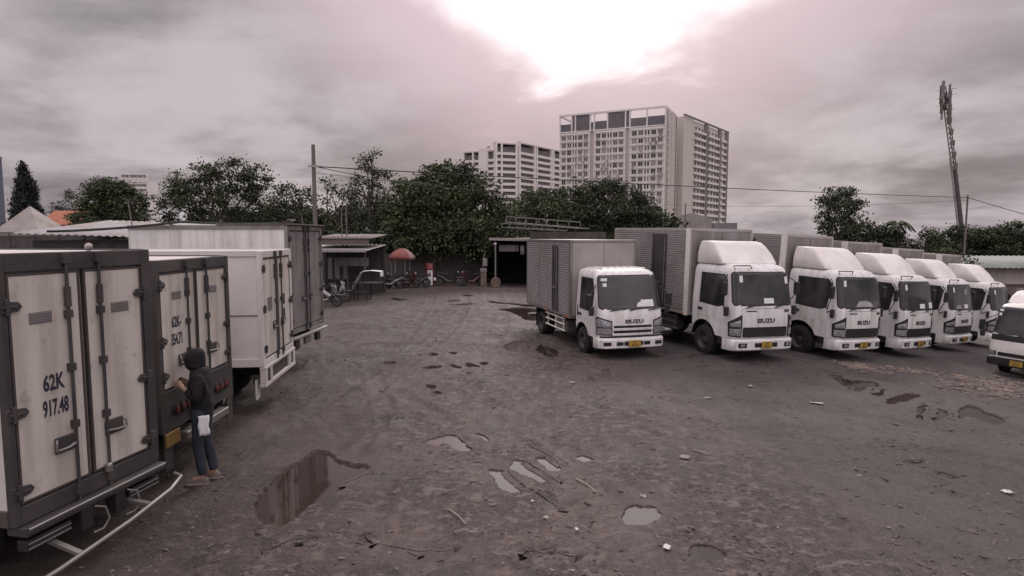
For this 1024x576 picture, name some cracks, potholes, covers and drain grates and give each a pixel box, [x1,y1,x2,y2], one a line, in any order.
pothole [482,467,533,496]
pothole [953,404,1012,426]
pothole [862,387,891,397]
pothole [613,502,670,529]
pothole [822,373,885,393]
pothole [680,540,735,565]
pothole [494,307,536,321]
pothole [245,448,375,535]
pothole [421,433,477,453]
pothole [504,458,561,487]
pothole [528,343,563,358]
pothole [530,455,568,475]
